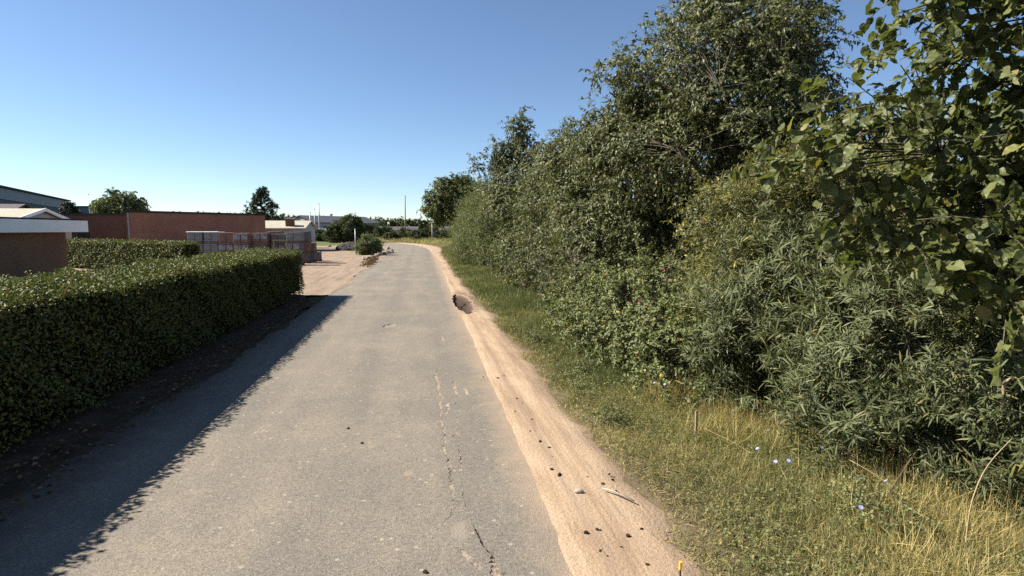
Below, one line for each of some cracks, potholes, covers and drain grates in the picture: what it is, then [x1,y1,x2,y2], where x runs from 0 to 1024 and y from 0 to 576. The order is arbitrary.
crack [434,370,506,576]
pothole [452,294,475,314]
